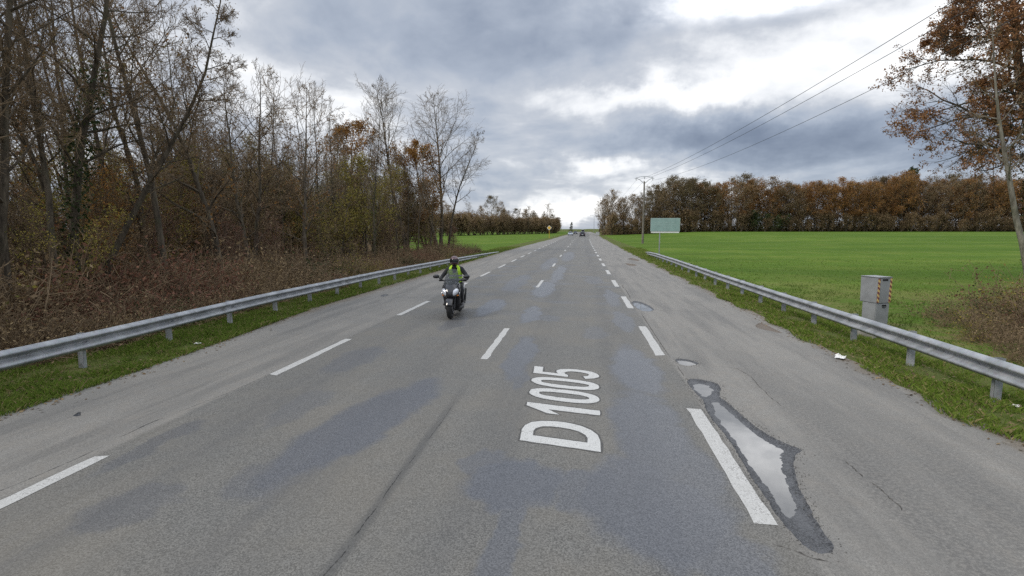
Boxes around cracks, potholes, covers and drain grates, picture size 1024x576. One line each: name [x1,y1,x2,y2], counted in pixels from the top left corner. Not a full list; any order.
crack [844,460,904,512]
pothole [687,379,834,554]
pothole [755,323,781,333]
pothole [631,301,654,311]
